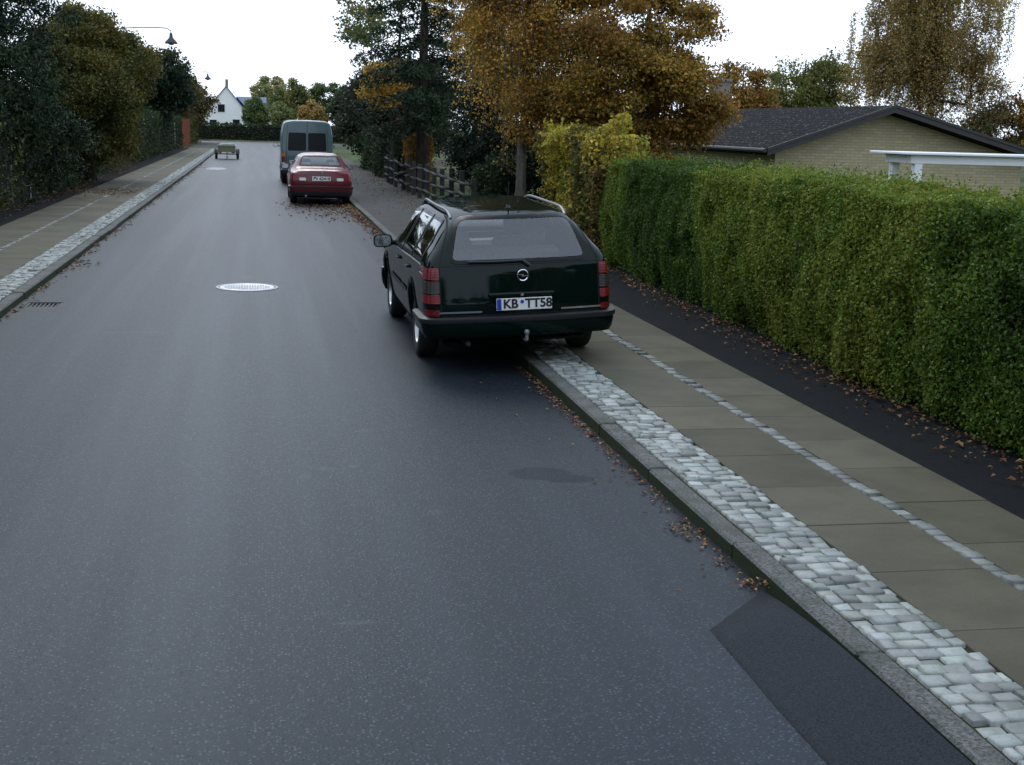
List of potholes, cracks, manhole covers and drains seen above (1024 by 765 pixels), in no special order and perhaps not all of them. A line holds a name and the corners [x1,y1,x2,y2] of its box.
manhole cover [216,283,279,291]
